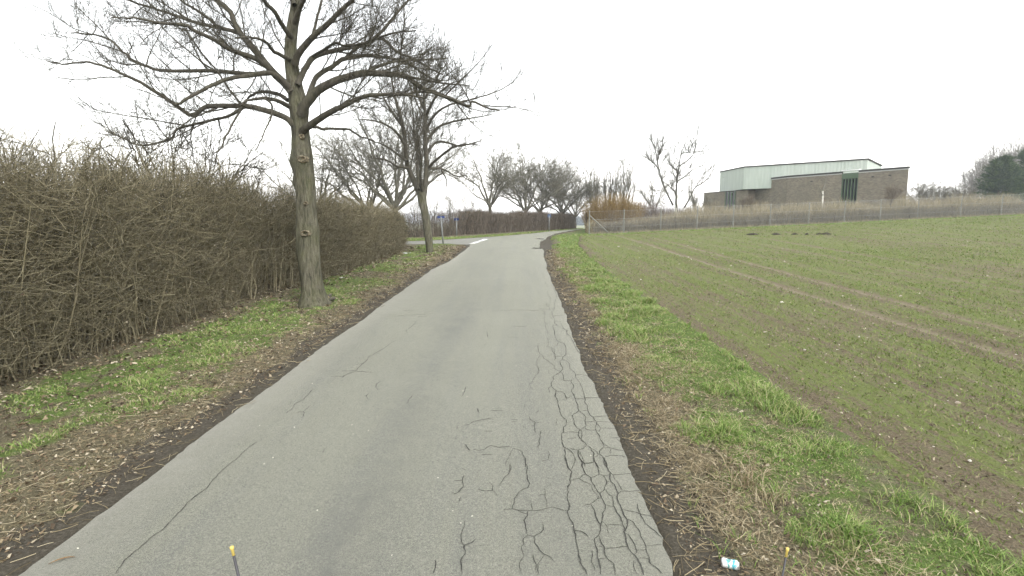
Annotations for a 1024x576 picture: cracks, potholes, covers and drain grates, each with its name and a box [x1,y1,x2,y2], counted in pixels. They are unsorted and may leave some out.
crack [451,286,663,575]
crack [116,443,255,572]
